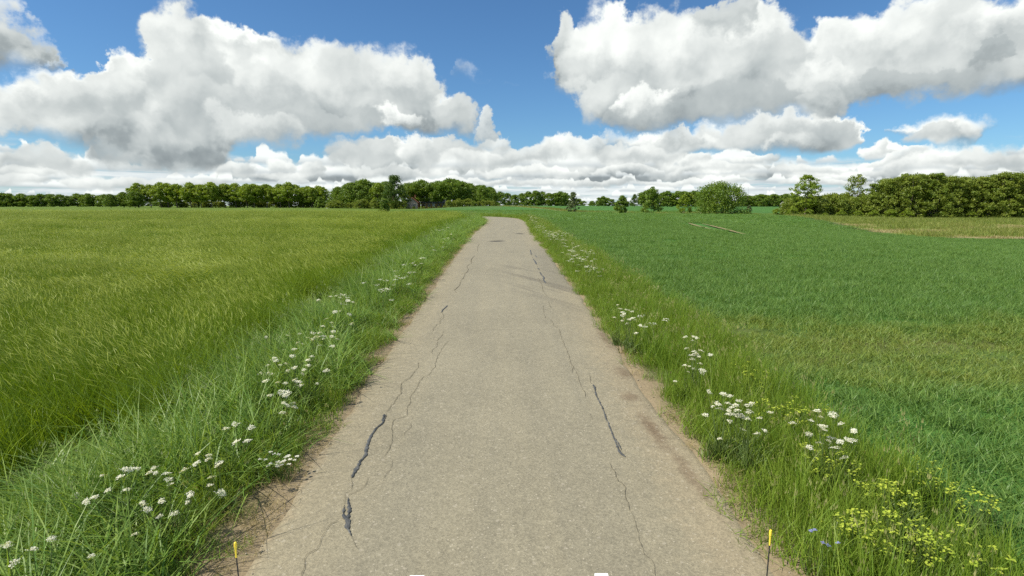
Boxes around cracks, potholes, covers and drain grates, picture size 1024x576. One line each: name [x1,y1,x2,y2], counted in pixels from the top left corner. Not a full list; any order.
crack [530,250,591,415]
crack [301,305,448,576]
